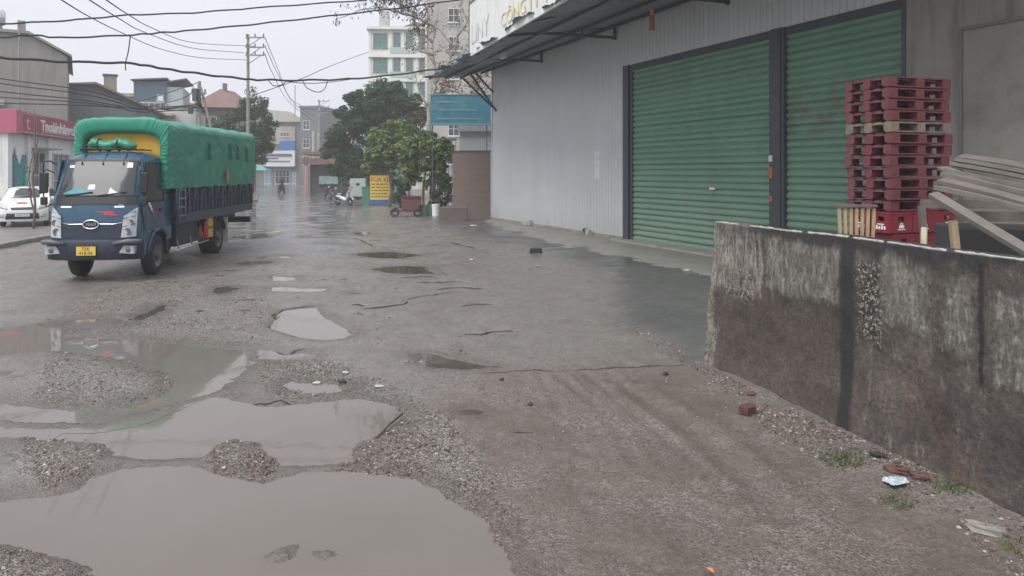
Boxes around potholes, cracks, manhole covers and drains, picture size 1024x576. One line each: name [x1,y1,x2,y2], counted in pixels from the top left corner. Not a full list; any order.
crack [353,276,492,315]
pothole [367,264,440,274]
pothole [403,350,509,370]
pothole [210,284,246,295]
pothole [347,251,432,259]
pothole [0,460,538,576]
pothole [51,392,418,469]
pothole [276,376,360,395]
pothole [129,301,177,321]
pothole [0,315,264,443]
pothole [263,305,360,341]
